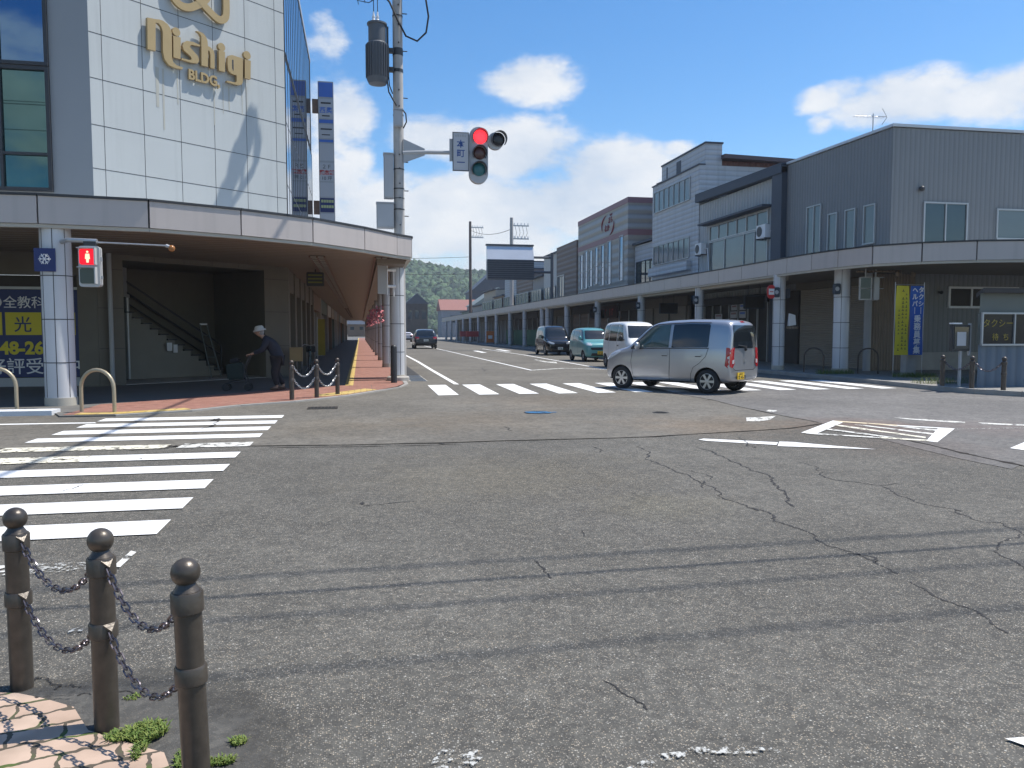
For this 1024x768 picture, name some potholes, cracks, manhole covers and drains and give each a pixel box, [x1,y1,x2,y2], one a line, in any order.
crack [605,681,648,710]
crack [801,462,1024,569]
crack [637,439,898,574]
